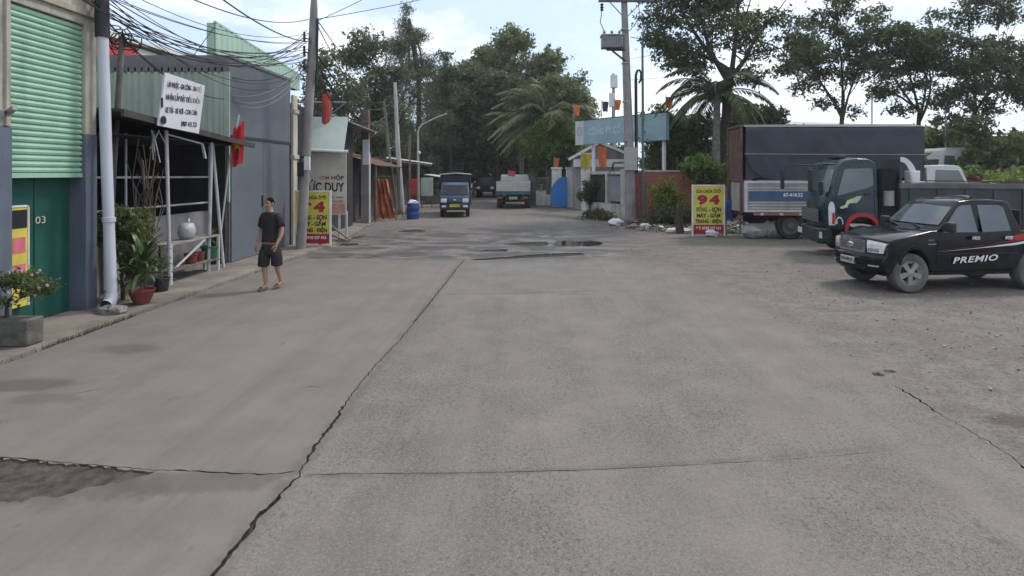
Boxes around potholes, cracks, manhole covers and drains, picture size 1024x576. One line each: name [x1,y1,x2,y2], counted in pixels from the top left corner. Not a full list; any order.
crack [1,260,878,576]
crack [897,387,1024,468]
